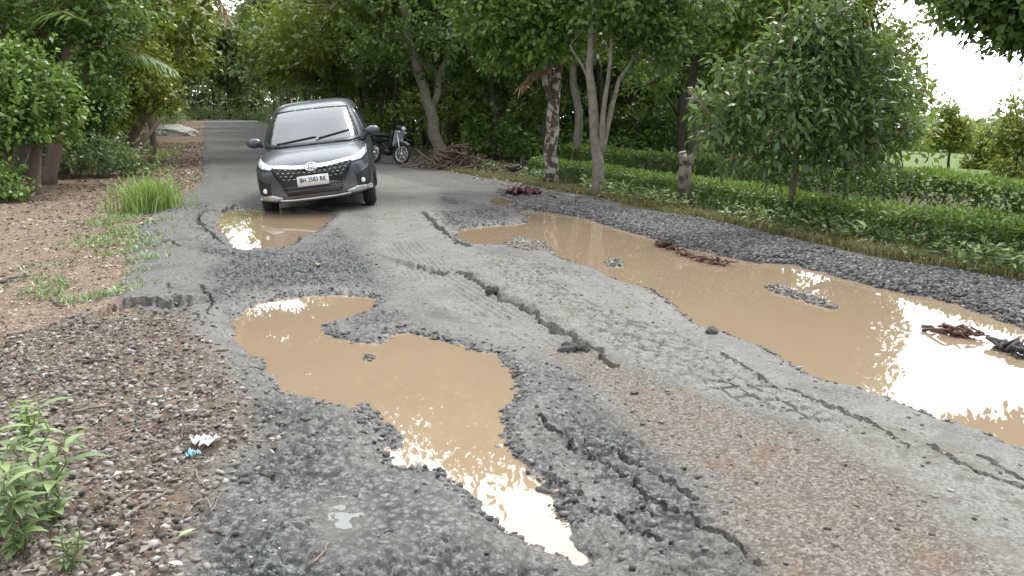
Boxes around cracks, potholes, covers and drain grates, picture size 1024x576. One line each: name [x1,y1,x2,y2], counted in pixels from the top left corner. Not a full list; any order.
pothole [217,286,623,575]
crack [98,282,216,318]
crack [136,204,238,247]
crack [706,351,1024,489]
crack [539,413,768,567]
pothole [210,205,340,250]
pothole [445,206,1024,451]
crack [417,264,620,368]
